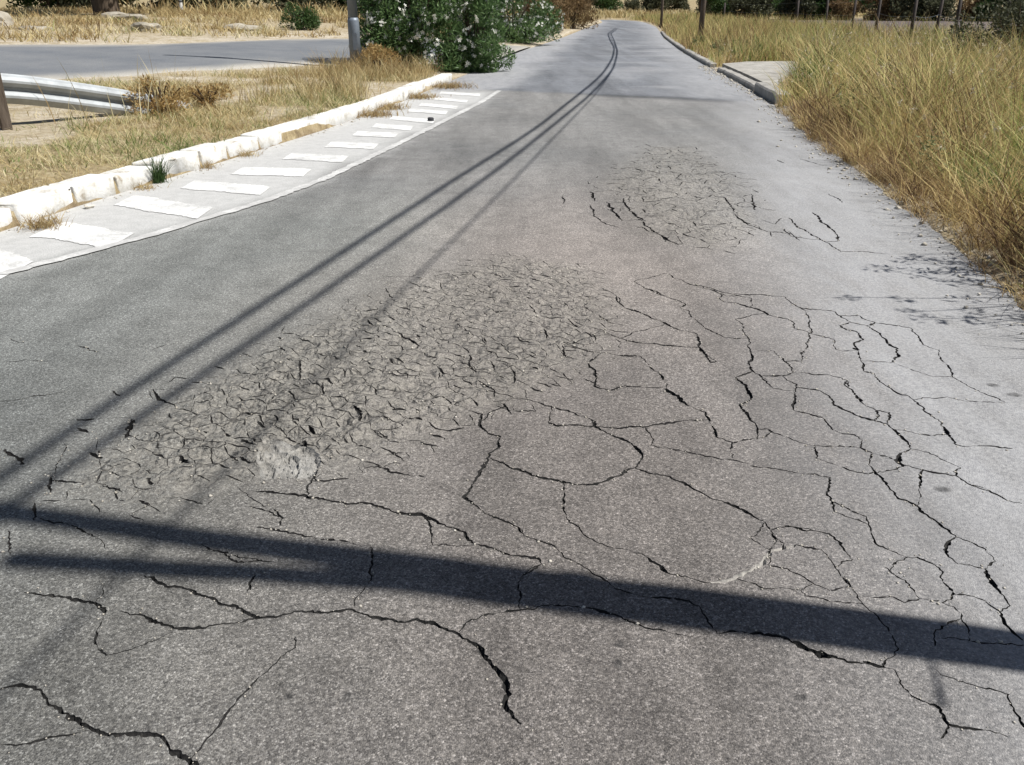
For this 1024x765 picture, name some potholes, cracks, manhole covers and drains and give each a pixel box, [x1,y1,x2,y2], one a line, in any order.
crack [562,144,883,254]
crack [0,253,1024,765]
